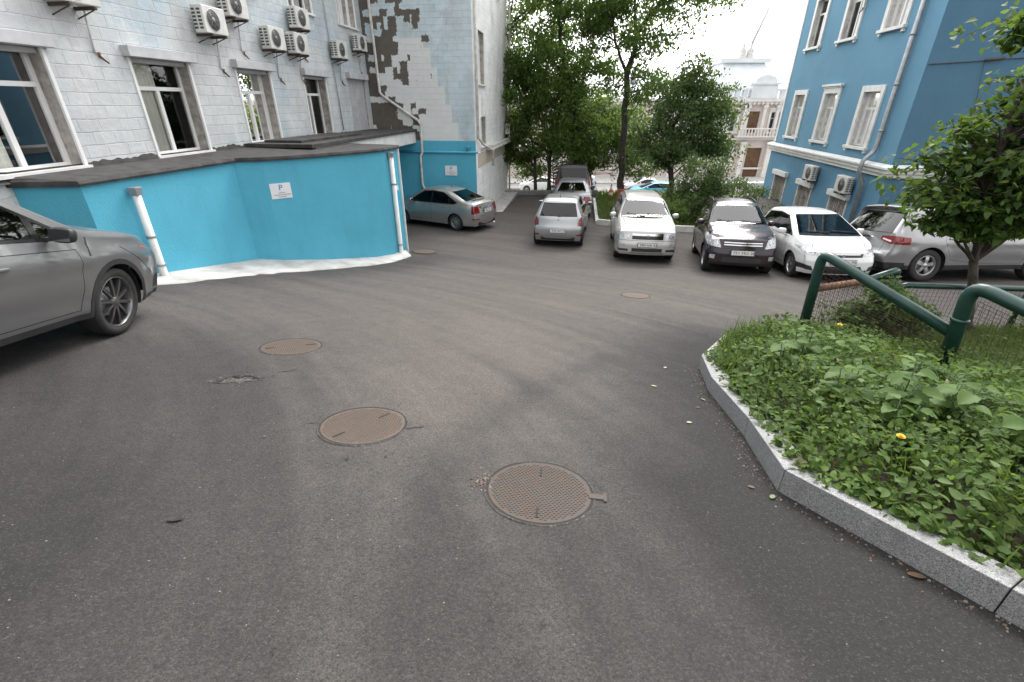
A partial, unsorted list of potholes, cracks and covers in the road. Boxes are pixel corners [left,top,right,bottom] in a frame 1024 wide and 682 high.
manhole cover [258,338,323,356]
manhole cover [316,407,408,447]
manhole cover [483,461,607,527]
pothole [206,374,270,384]
